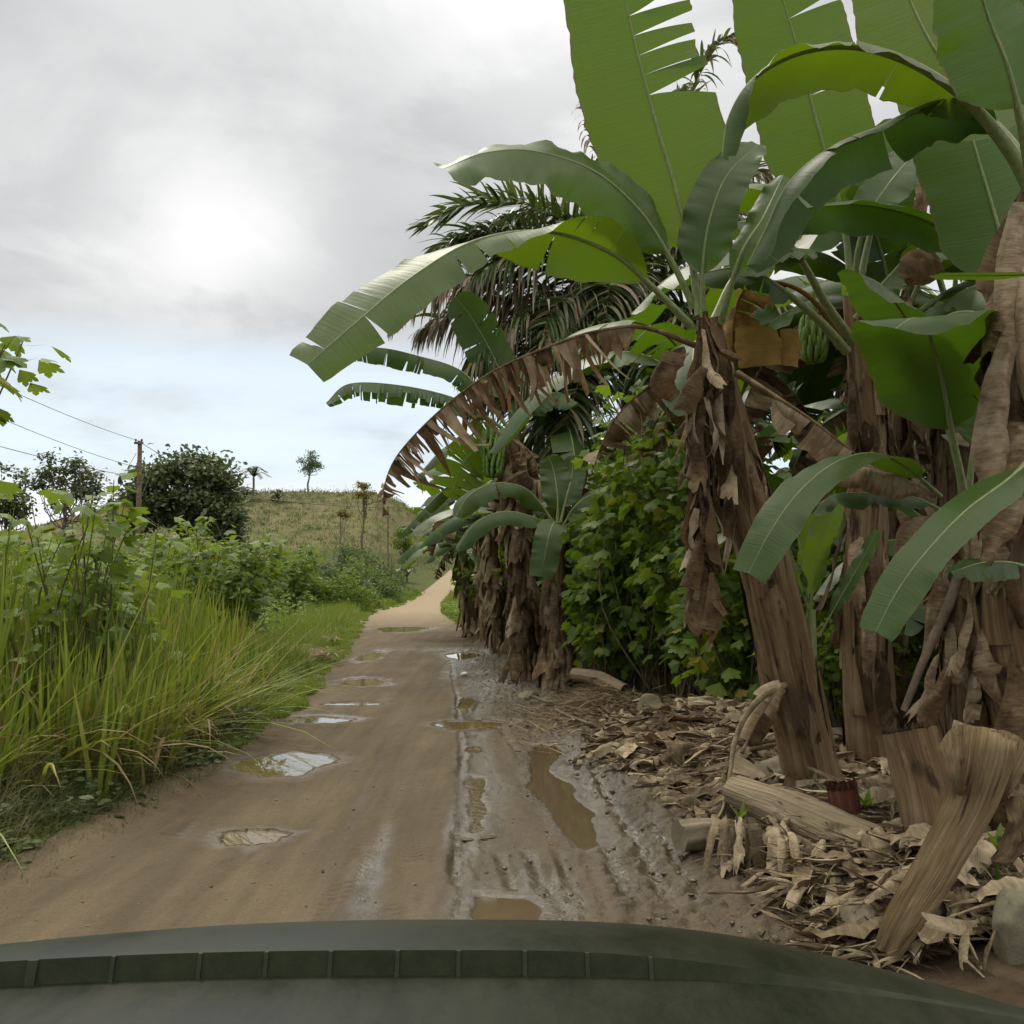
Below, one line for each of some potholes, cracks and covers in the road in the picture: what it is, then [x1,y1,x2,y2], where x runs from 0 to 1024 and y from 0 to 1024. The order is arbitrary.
pothole [430,719,511,731]
pothole [457,696,477,710]
pothole [445,652,485,660]
pothole [279,715,357,724]
pothole [336,677,390,687]
pothole [227,750,341,778]
pothole [354,651,384,661]
pothole [218,827,293,846]
